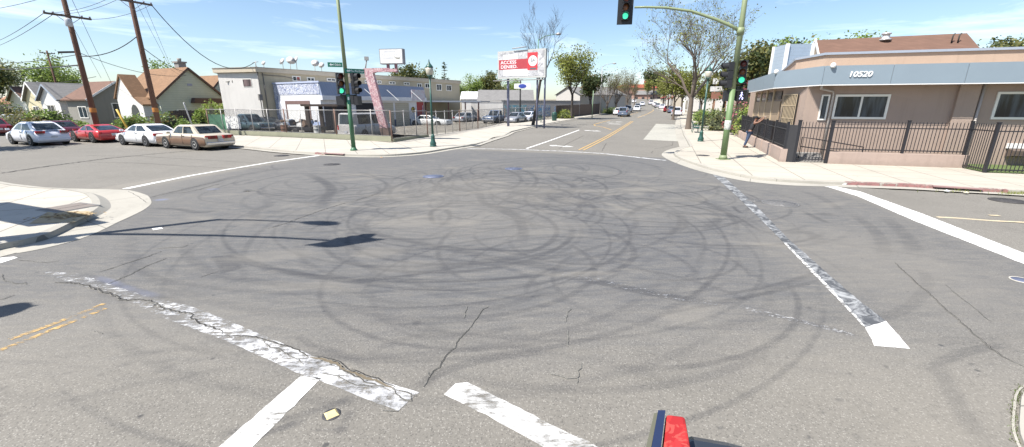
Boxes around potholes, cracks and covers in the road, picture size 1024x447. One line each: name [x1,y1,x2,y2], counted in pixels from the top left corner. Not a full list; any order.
crack [550,308,582,383]
crack [895,262,1023,366]
crack [58,247,489,411]
